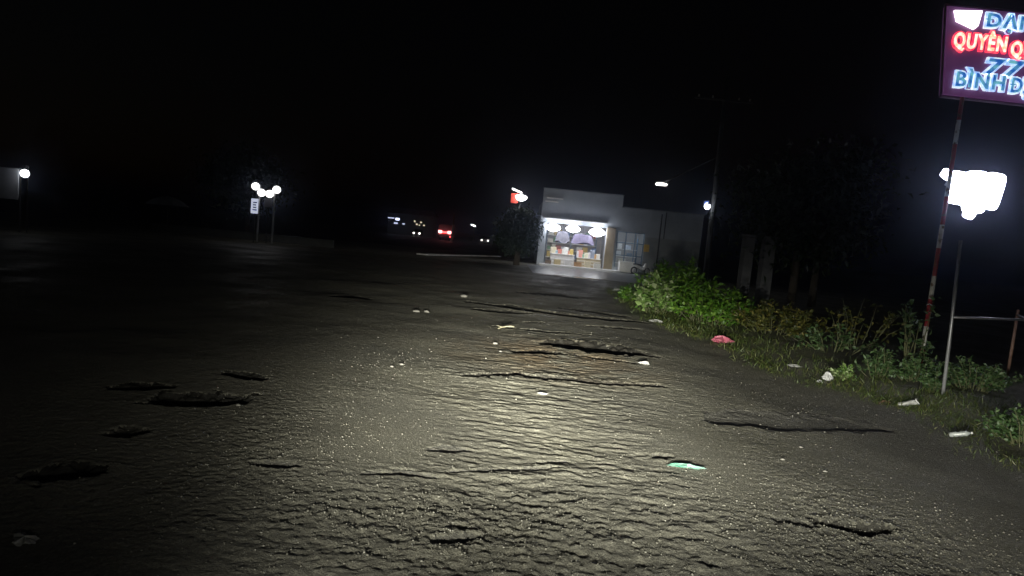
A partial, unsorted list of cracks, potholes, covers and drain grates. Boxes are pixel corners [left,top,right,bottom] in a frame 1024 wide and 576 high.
pothole [16,461,109,488]
pothole [103,426,151,438]
pothole [105,382,177,391]
pothole [135,379,259,407]
crack [361,460,568,479]
pothole [221,370,268,381]
